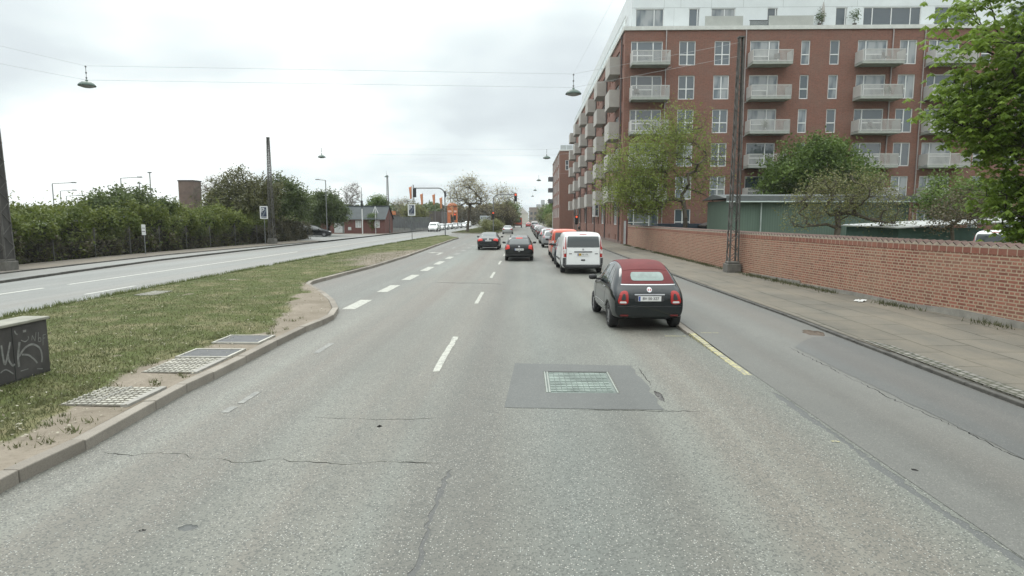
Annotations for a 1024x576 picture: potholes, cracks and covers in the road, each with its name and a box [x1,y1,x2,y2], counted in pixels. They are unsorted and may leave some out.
crack [104,452,452,576]
manhole cover [175,348,246,359]
manhole cover [211,335,276,345]
